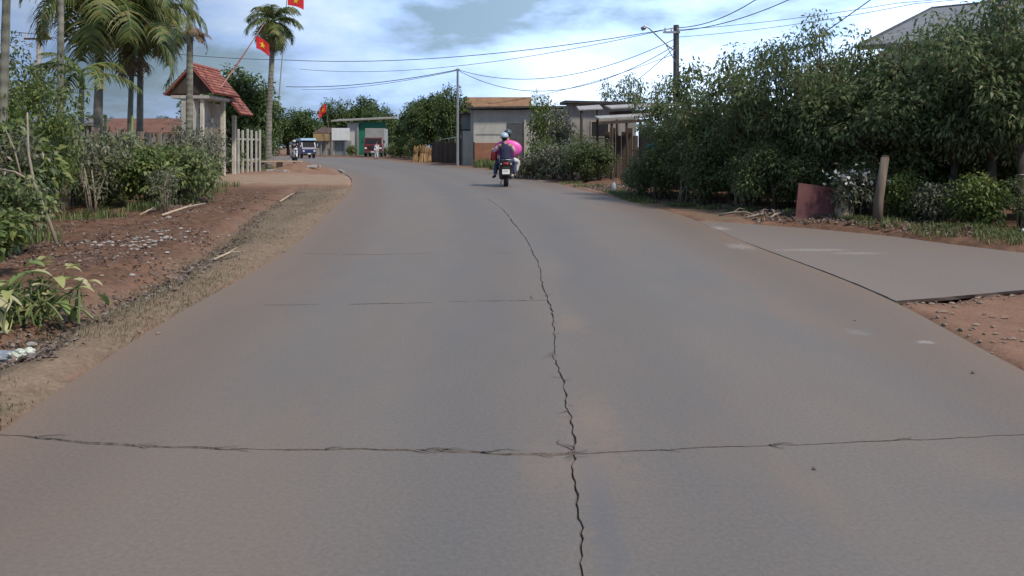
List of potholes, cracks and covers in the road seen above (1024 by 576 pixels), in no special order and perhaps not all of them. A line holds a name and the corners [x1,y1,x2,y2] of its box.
crack [0,196,1024,576]
